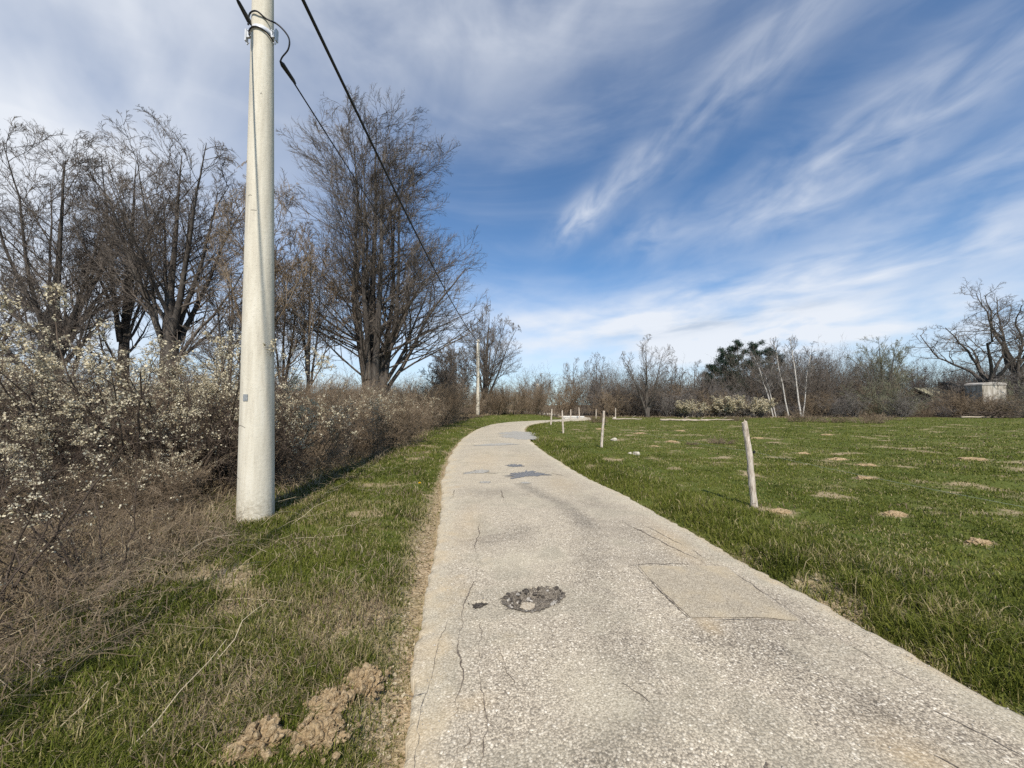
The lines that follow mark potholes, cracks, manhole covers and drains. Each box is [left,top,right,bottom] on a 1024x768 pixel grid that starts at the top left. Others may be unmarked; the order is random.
pothole [500,586,566,613]
crack [395,524,526,768]
crack [627,524,721,566]
